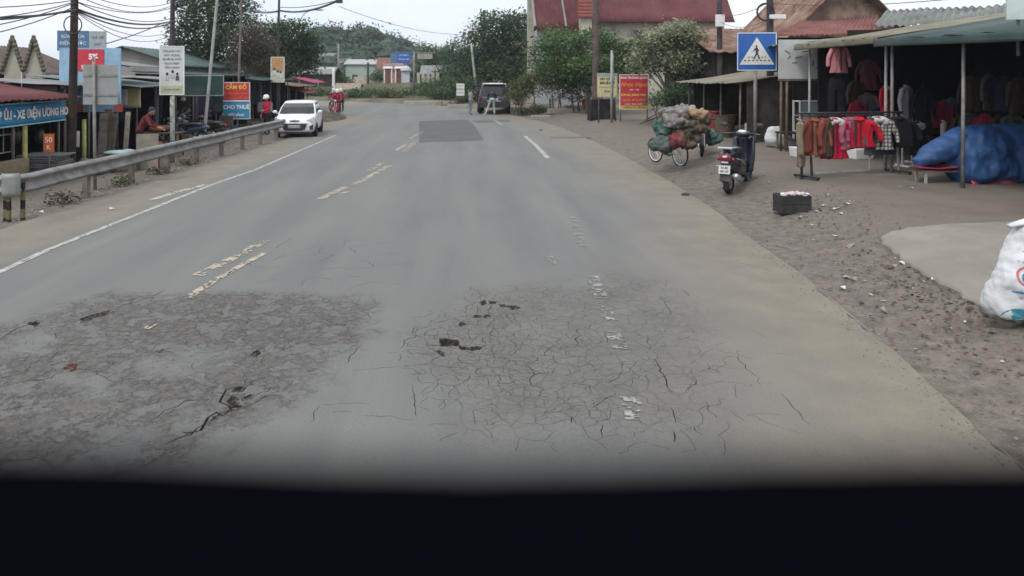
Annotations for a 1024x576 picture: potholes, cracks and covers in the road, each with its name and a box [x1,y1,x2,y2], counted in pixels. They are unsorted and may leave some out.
crack [0,242,786,455]
